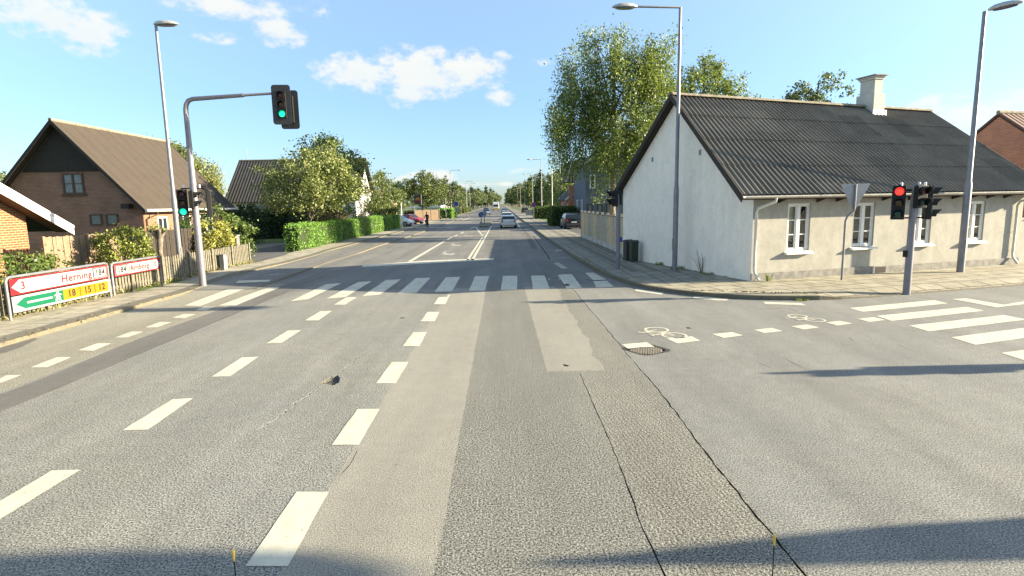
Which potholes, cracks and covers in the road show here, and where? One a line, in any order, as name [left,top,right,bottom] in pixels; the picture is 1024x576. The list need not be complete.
crack [574,279,807,576]
manhole cover [621,344,670,356]
